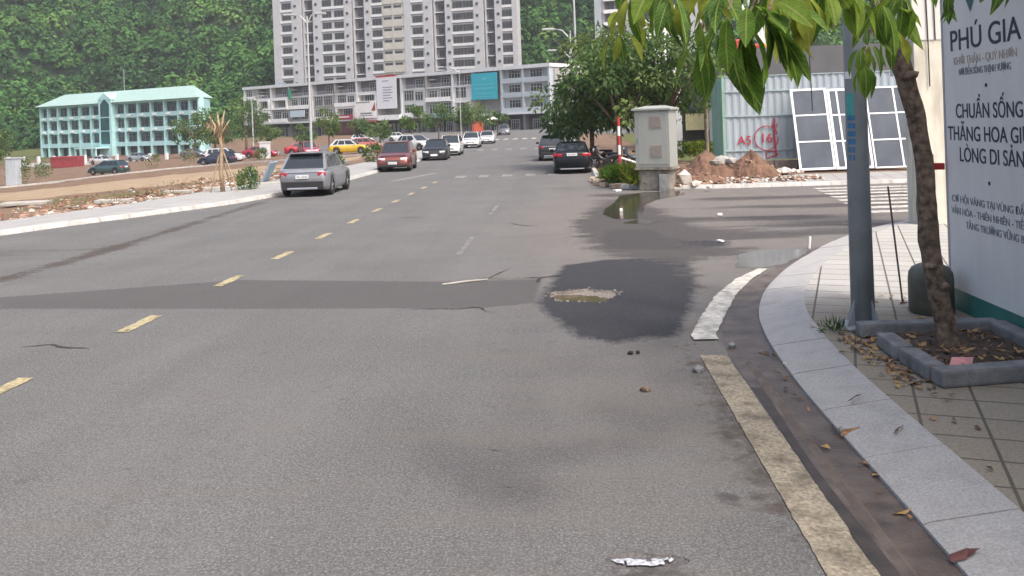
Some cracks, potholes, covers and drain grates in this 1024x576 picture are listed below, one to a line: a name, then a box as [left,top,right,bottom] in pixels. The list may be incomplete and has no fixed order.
pothole [544,287,623,303]
